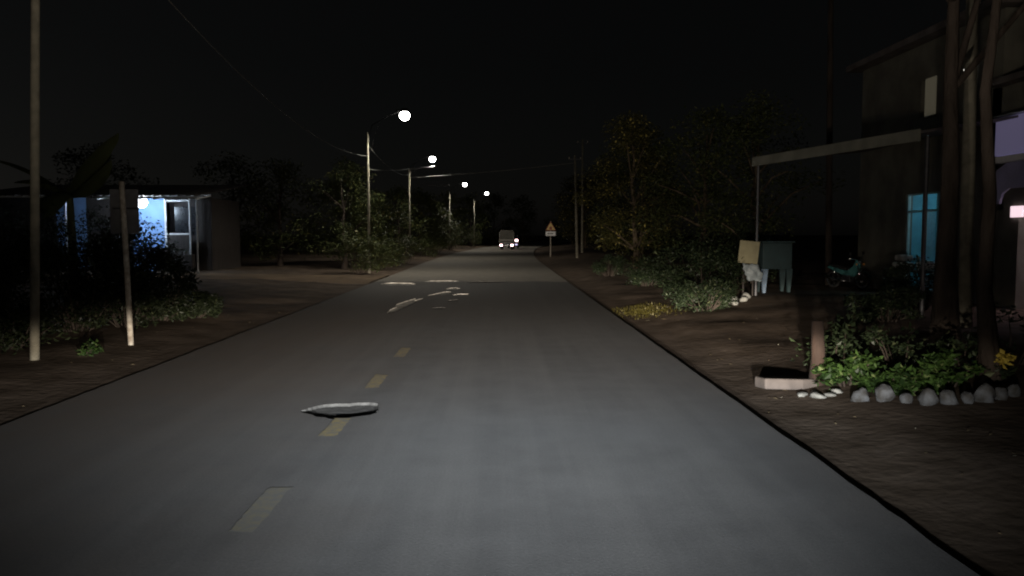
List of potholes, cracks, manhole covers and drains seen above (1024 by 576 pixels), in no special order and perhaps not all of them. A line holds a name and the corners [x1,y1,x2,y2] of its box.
pothole [387,298,423,313]
pothole [301,402,380,419]
